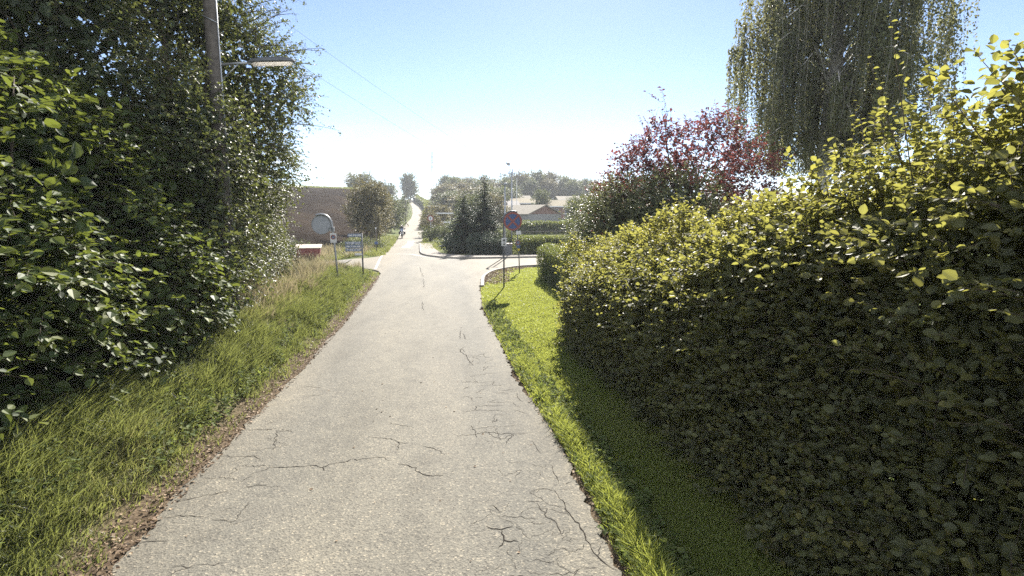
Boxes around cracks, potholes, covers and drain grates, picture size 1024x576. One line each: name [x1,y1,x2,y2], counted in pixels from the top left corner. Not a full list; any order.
crack [470,450,618,576]
crack [164,420,292,574]
crack [459,331,539,451]
crack [258,423,441,476]
